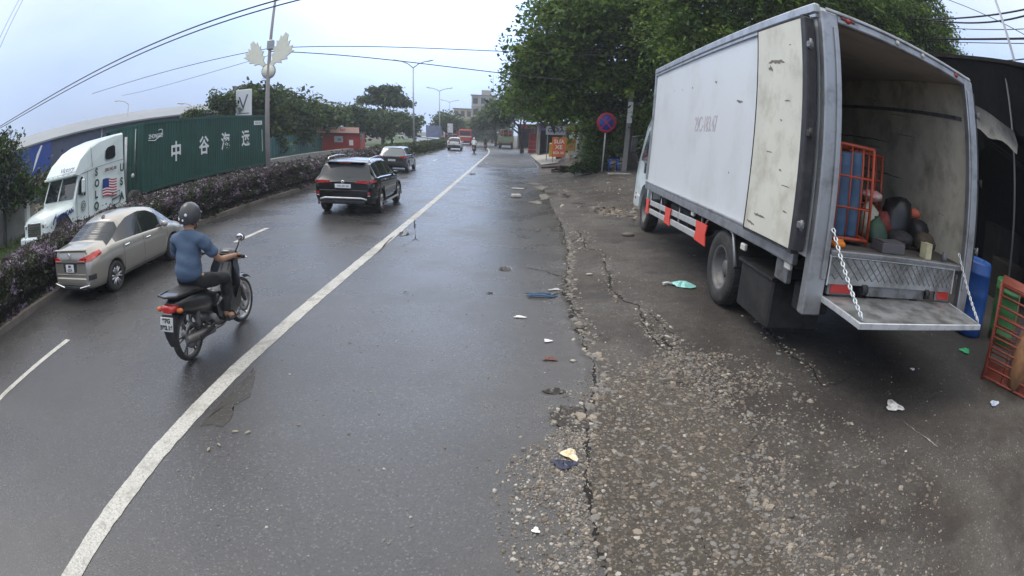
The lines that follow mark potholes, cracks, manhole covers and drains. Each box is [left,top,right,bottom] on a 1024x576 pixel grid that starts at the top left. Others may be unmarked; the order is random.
crack [765,328,852,387]
crack [523,217,683,576]
